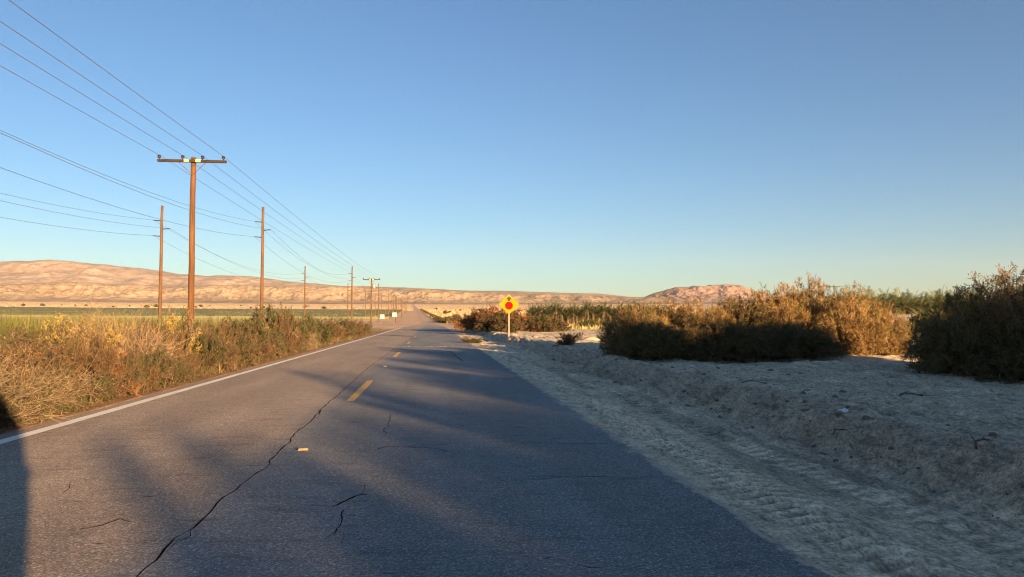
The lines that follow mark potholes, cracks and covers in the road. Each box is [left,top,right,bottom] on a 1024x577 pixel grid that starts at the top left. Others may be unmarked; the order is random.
crack [83,345,398,577]
